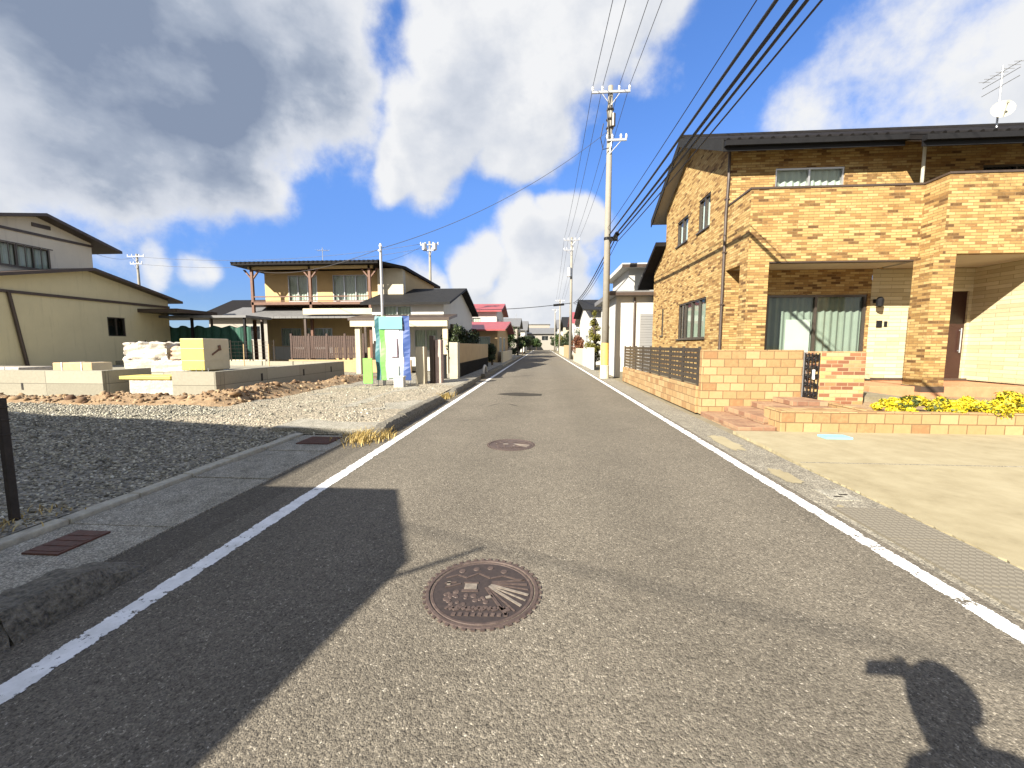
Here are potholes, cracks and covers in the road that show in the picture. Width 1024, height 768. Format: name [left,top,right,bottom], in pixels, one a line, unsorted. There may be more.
manhole cover [422,558,542,632]
manhole cover [487,439,535,451]
